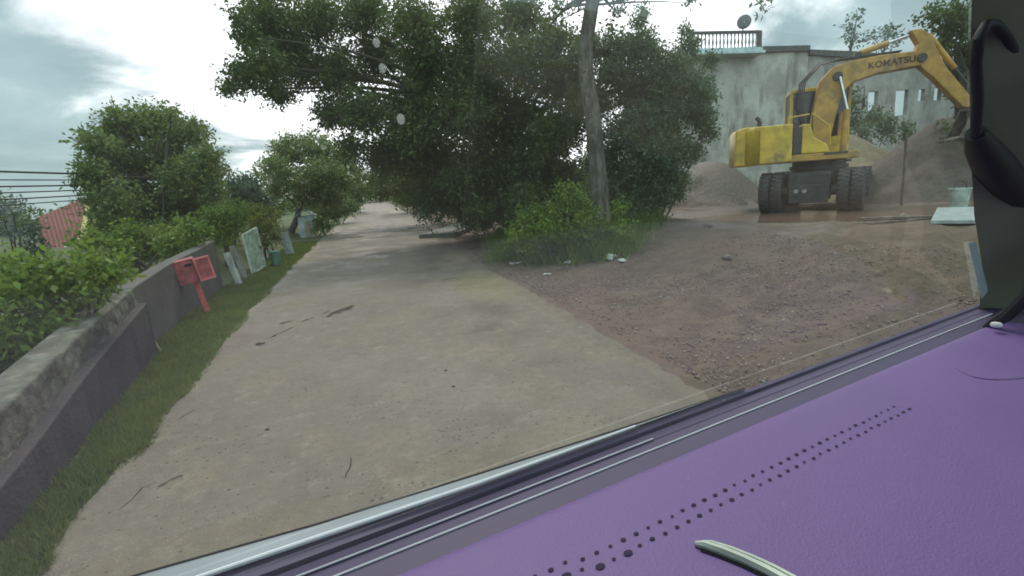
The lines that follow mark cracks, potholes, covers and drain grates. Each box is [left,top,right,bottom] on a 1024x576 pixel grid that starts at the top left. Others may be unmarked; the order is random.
crack [270,311,329,338]
